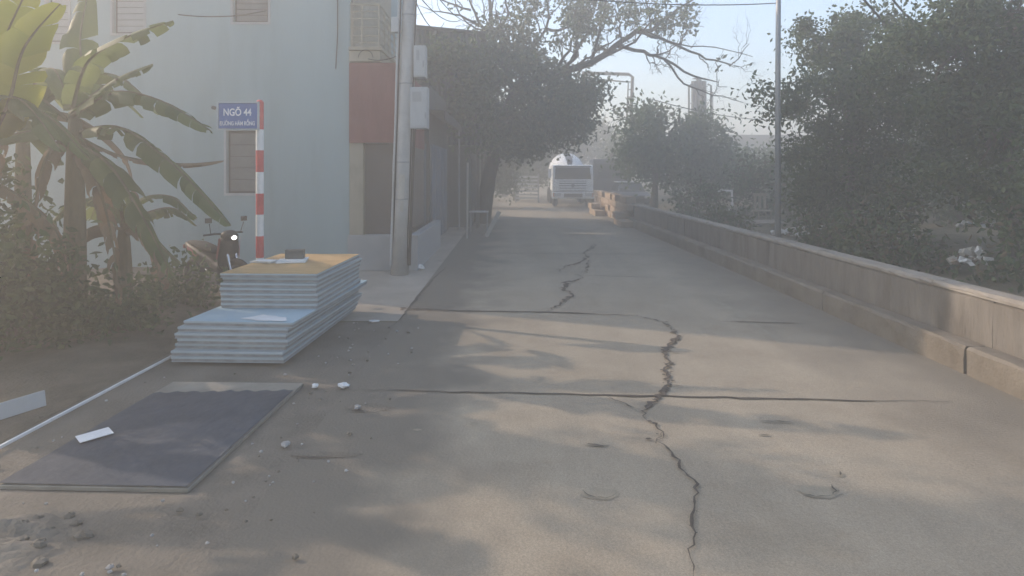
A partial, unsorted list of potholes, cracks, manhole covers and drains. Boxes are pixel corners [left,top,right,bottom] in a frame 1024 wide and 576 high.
crack [551,244,597,309]
crack [610,315,699,576]
